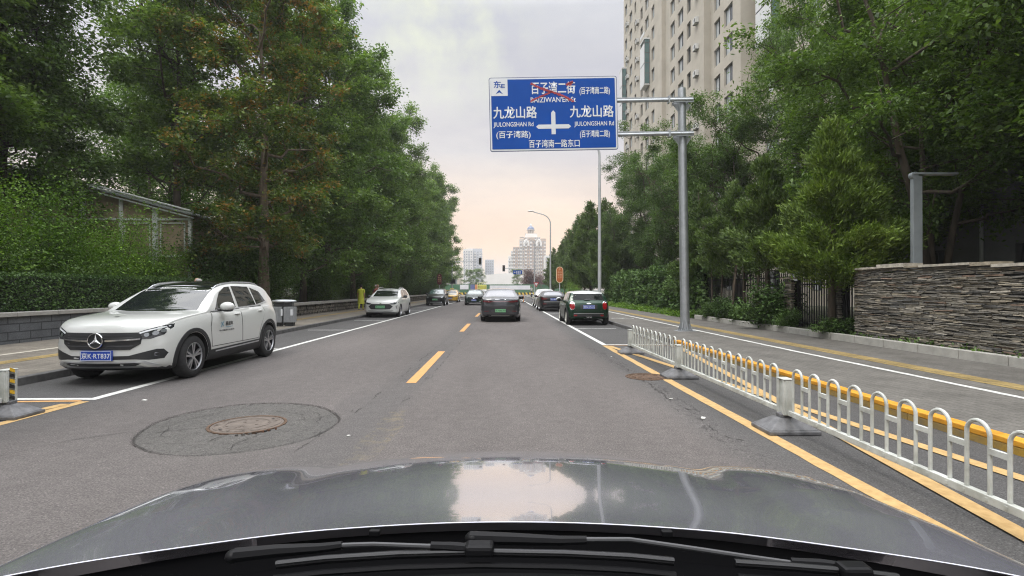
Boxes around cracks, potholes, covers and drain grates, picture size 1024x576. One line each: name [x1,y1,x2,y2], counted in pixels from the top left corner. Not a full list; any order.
manhole cover [625,373,666,381]
manhole cover [206,415,287,435]
